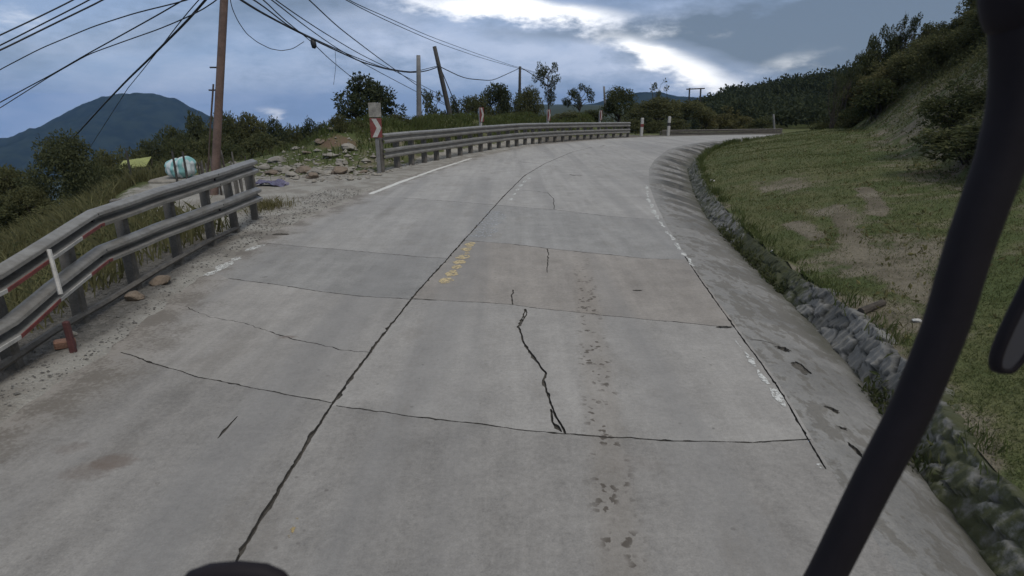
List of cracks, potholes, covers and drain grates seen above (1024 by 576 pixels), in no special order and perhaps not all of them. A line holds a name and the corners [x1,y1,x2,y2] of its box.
crack [121,290,810,443]
crack [228,278,426,300]
crack [467,240,648,272]
pothole [791,361,812,375]
